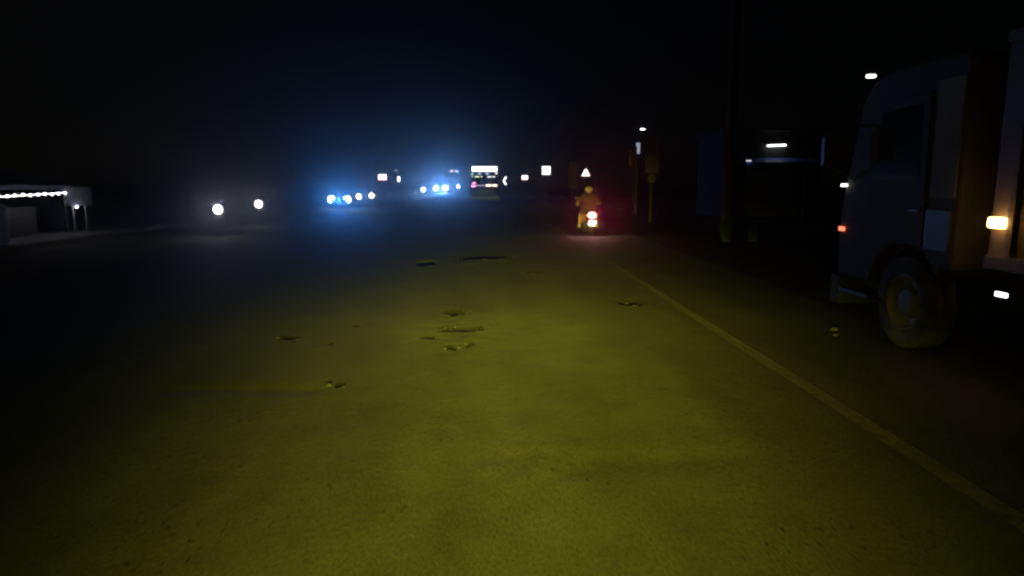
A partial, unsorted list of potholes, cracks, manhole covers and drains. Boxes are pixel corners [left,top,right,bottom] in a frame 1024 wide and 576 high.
pothole [440,309,466,317]
pothole [612,298,649,307]
pothole [411,259,438,267]
